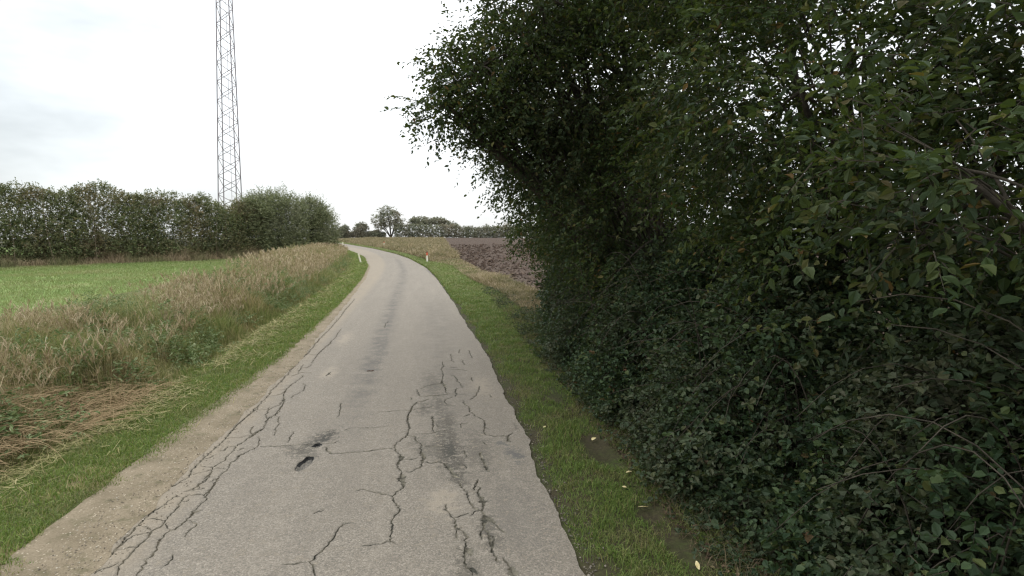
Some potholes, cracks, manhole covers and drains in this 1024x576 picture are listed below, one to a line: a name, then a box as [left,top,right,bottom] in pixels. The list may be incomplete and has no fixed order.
crack [96,299,519,576]
pothole [295,457,314,472]
